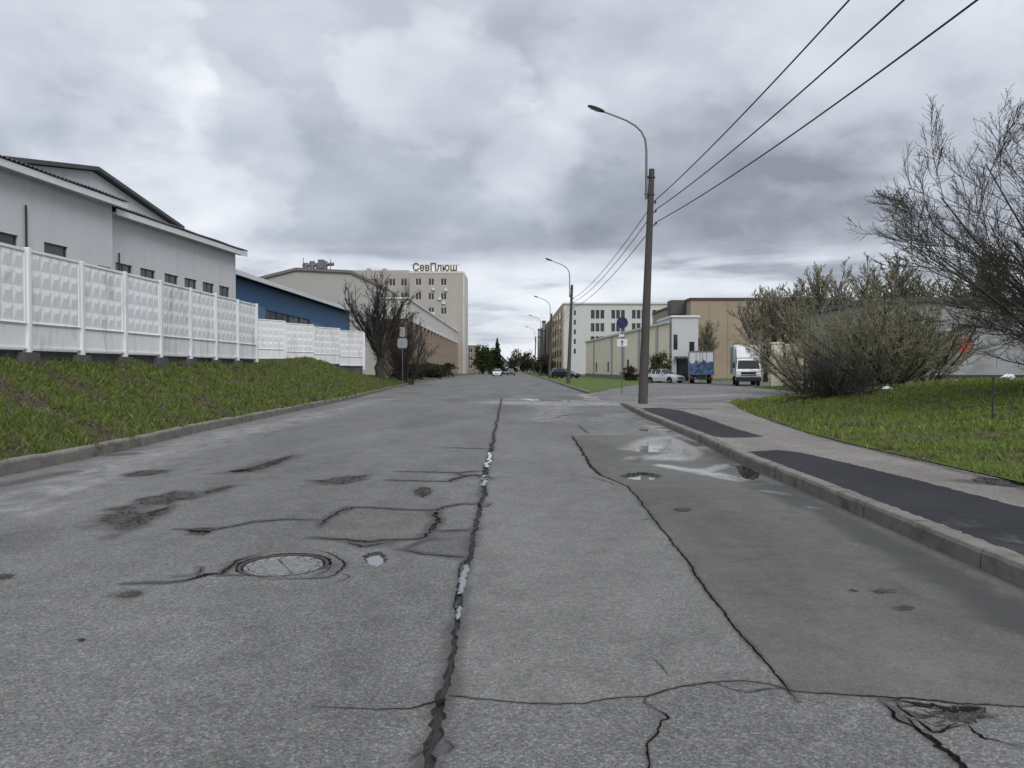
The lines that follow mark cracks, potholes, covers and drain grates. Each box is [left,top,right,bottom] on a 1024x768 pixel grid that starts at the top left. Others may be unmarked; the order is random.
manhole cover [235,553,332,577]
pothole [619,472,663,480]
pothole [931,705,987,724]
pothole [136,491,199,505]
crack [333,661,1024,768]
pothole [100,506,171,530]
pothole [315,475,366,484]
pothole [414,487,432,498]
crack [285,504,481,579]
pothole [736,465,760,480]
pothole [228,455,293,473]
pothole [362,551,388,567]
